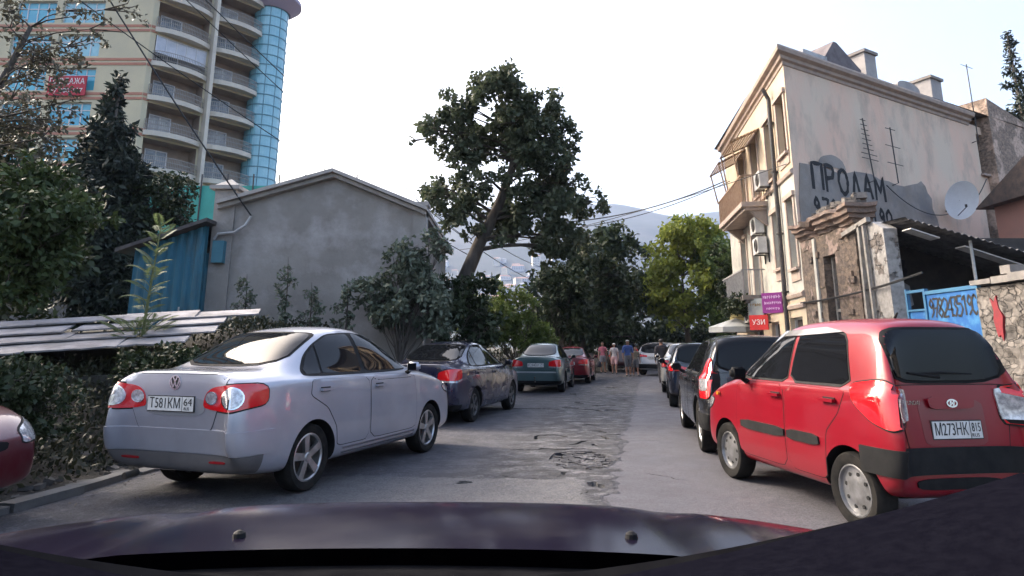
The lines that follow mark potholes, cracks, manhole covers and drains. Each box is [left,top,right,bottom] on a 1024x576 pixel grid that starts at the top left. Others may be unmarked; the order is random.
crack [505,431,613,479]
